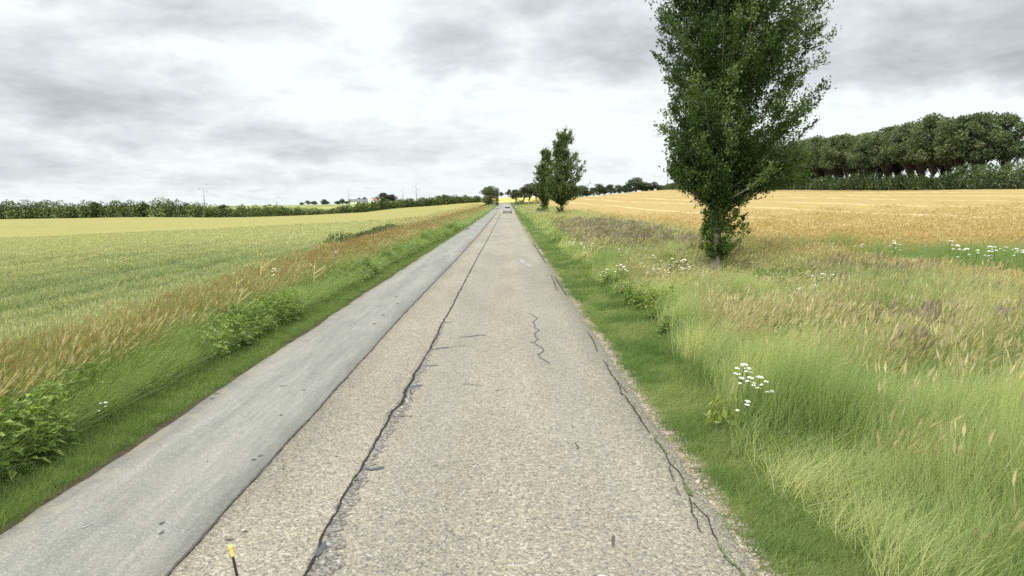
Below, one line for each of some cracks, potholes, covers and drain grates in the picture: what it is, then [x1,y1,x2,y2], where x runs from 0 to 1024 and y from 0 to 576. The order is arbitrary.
crack [588,332,746,576]
crack [302,213,501,576]
